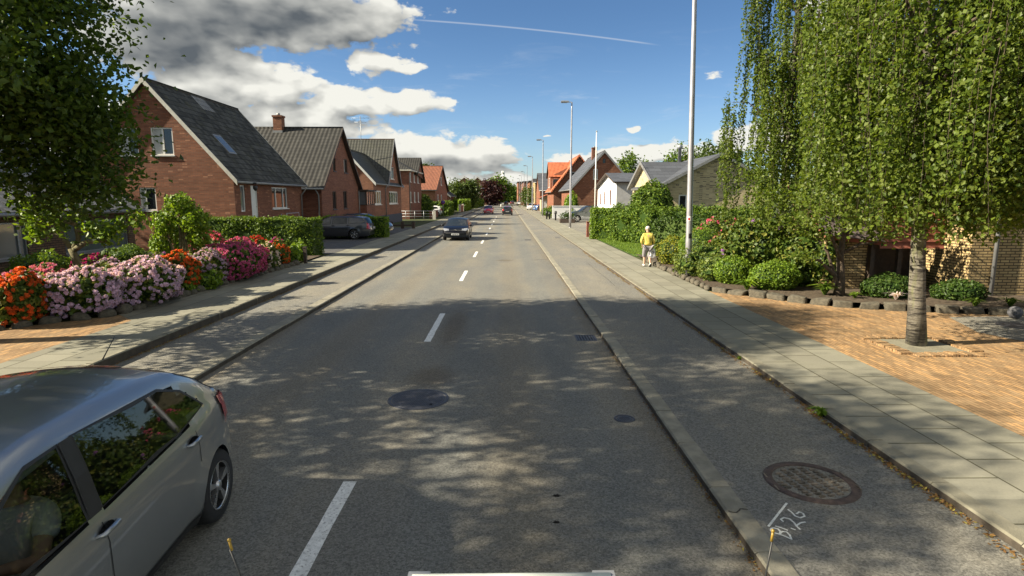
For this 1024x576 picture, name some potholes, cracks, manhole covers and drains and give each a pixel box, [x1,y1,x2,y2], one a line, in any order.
manhole cover [762,462,863,505]
manhole cover [387,389,449,410]
utility cover [614,415,635,423]
